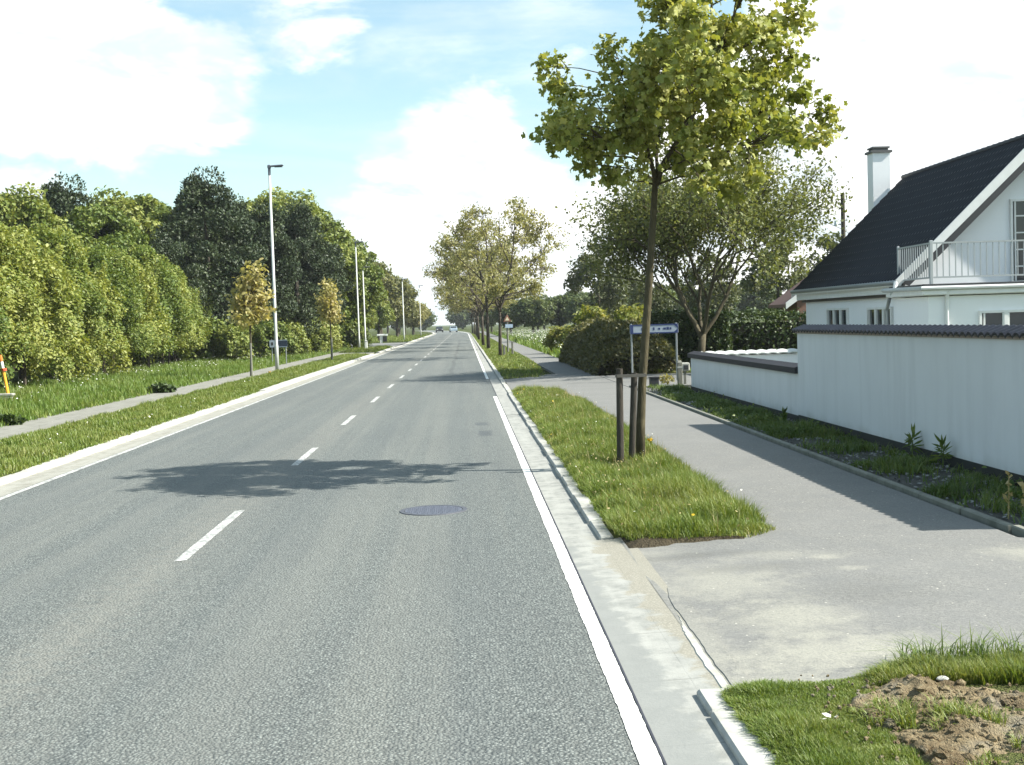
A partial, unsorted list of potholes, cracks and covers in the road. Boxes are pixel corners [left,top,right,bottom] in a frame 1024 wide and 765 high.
manhole cover [400,505,467,516]
